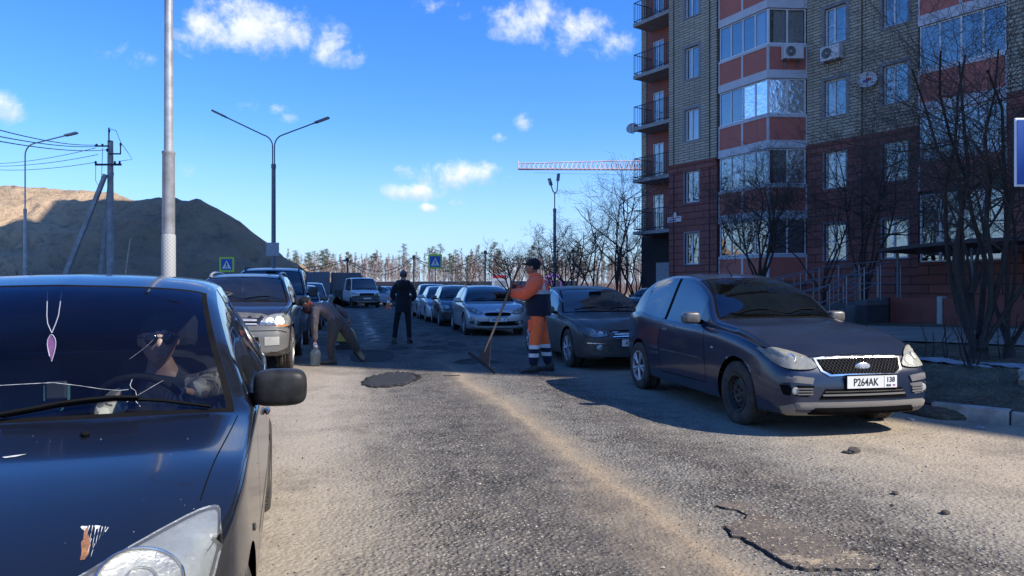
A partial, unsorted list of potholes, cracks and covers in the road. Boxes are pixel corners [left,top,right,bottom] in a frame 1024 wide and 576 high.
pothole [713,499,892,572]
